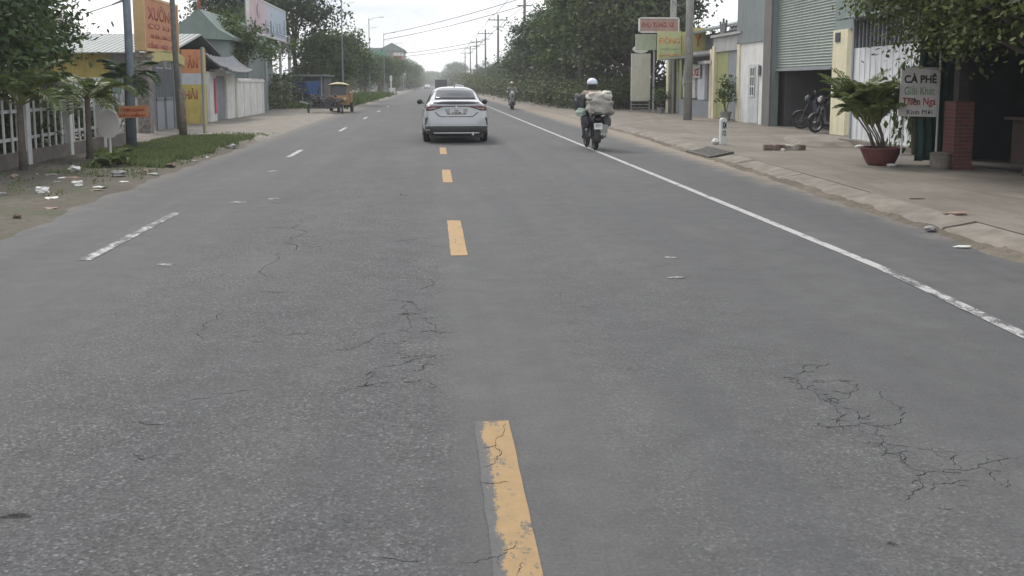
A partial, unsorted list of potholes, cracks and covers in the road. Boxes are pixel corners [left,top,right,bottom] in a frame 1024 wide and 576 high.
crack [782,363,1014,501]
crack [337,279,448,390]
